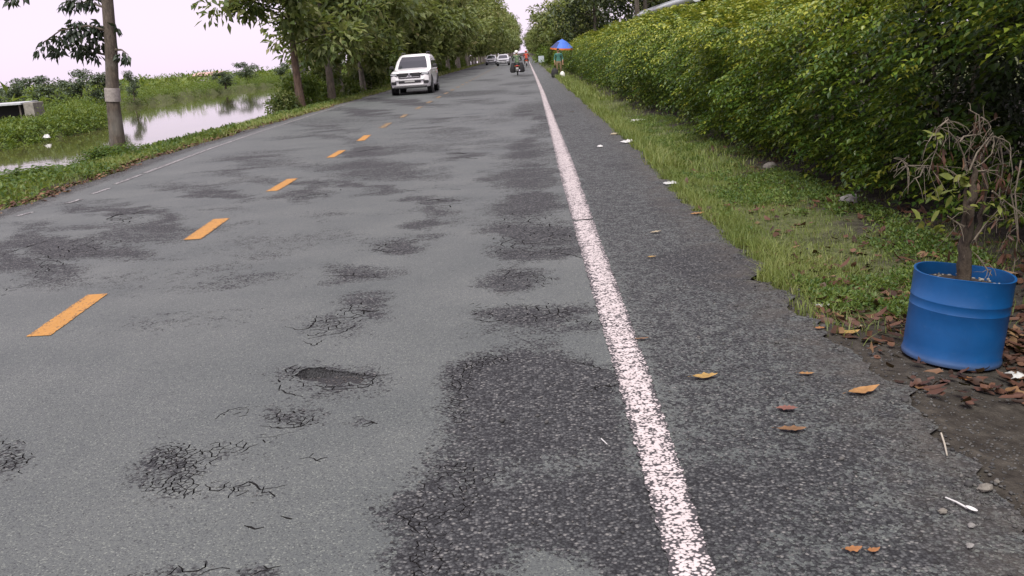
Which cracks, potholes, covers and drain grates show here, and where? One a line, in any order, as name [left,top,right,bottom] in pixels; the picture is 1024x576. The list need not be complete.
crack [141,365,392,499]
crack [285,302,380,346]
crack [468,211,597,325]
pothole [295,367,364,386]
crack [0,439,33,474]
